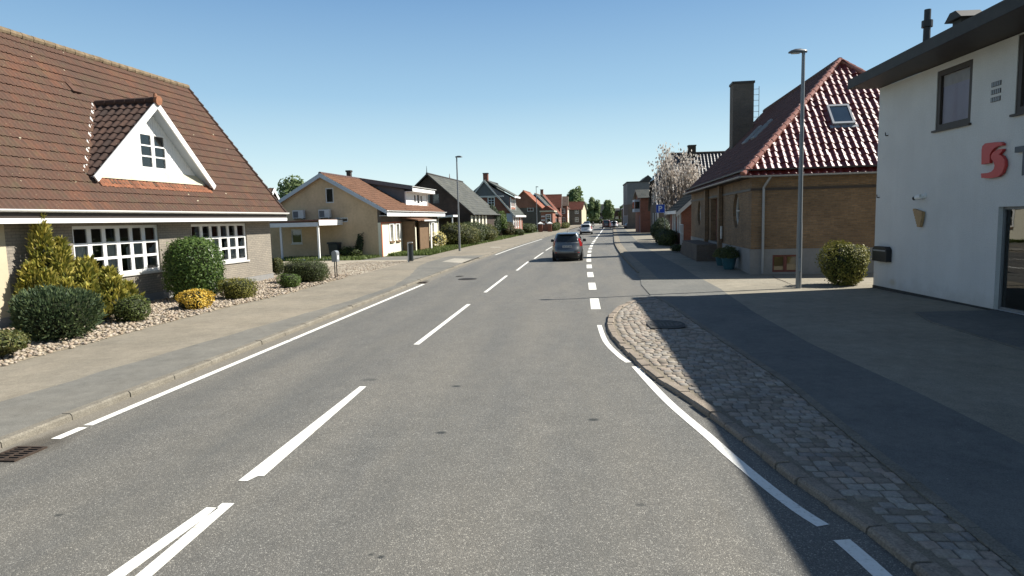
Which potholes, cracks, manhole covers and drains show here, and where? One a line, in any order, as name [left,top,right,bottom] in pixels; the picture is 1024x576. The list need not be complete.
drain grate [0,446,48,462]
manhole cover [647,320,686,329]
